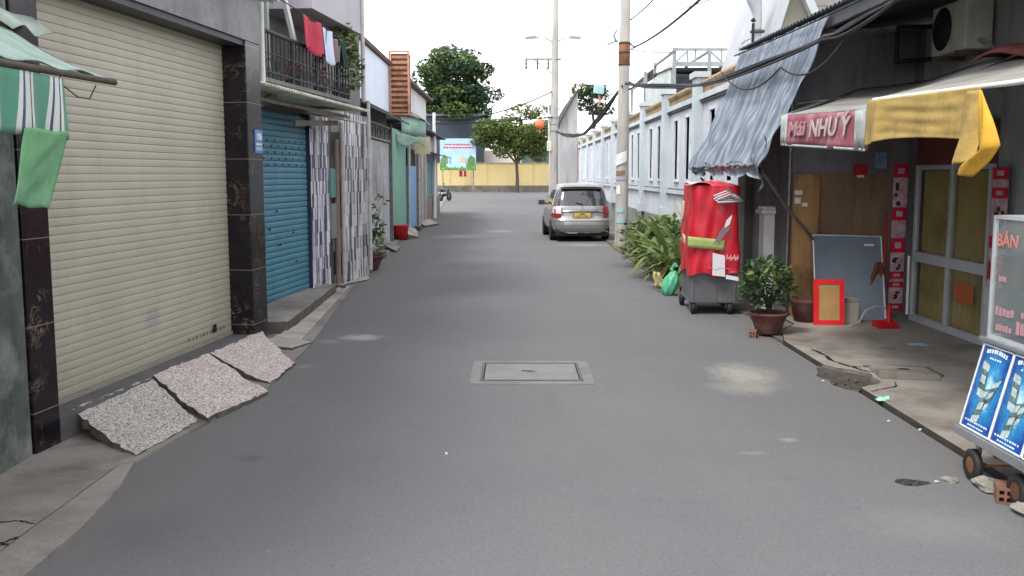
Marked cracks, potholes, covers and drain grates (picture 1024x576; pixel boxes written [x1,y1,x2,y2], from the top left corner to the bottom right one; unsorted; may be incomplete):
manhole cover [469,361,595,385]
manhole cover [863,364,944,380]
crack [812,349,898,391]
pothole [816,364,881,392]
crack [0,520,35,545]
